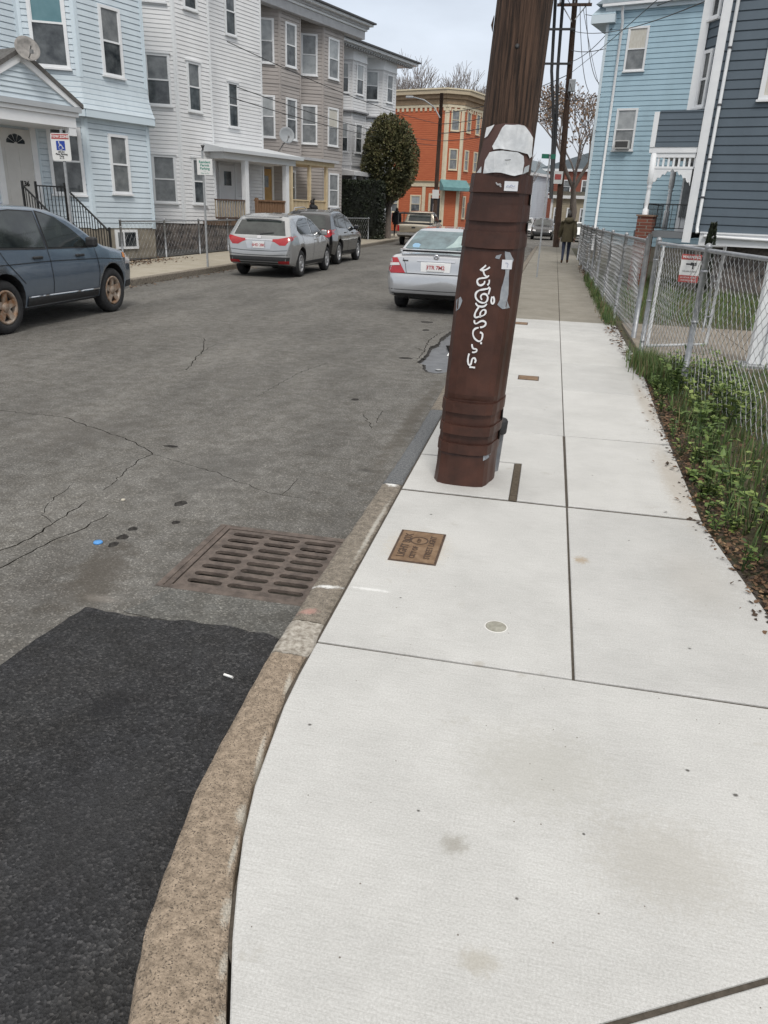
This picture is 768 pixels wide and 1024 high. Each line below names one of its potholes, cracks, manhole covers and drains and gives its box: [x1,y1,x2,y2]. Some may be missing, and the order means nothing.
utility cover [388,529,446,566]
drain grate [155,524,345,606]
crack [0,484,108,568]
crack [0,410,304,499]
pothole [417,331,451,374]
